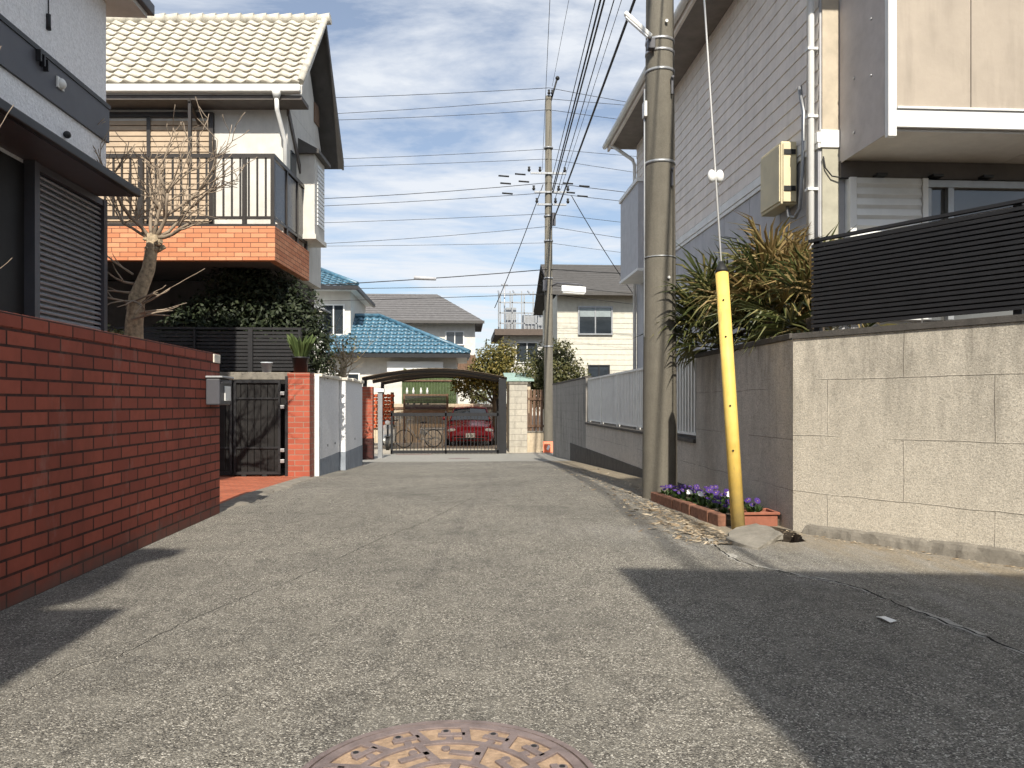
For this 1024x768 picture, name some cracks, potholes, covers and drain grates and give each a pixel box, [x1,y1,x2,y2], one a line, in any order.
manhole cover [302,720,595,768]
crack [700,536,1024,661]
